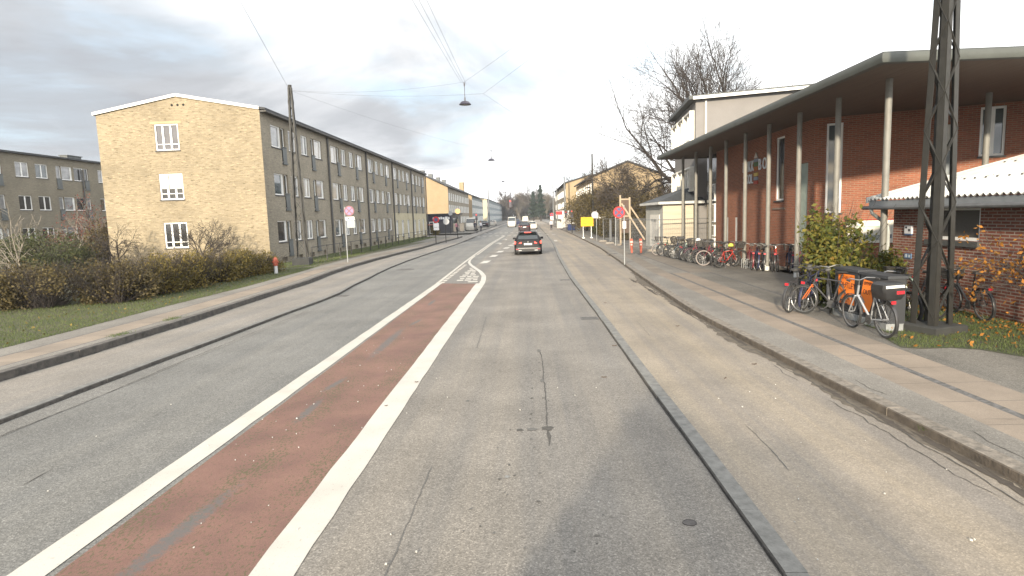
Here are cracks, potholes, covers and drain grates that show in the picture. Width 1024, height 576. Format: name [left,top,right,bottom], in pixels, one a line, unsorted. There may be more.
crack [384,466,432,576]
crack [540,352,551,446]
crack [760,352,1024,505]
